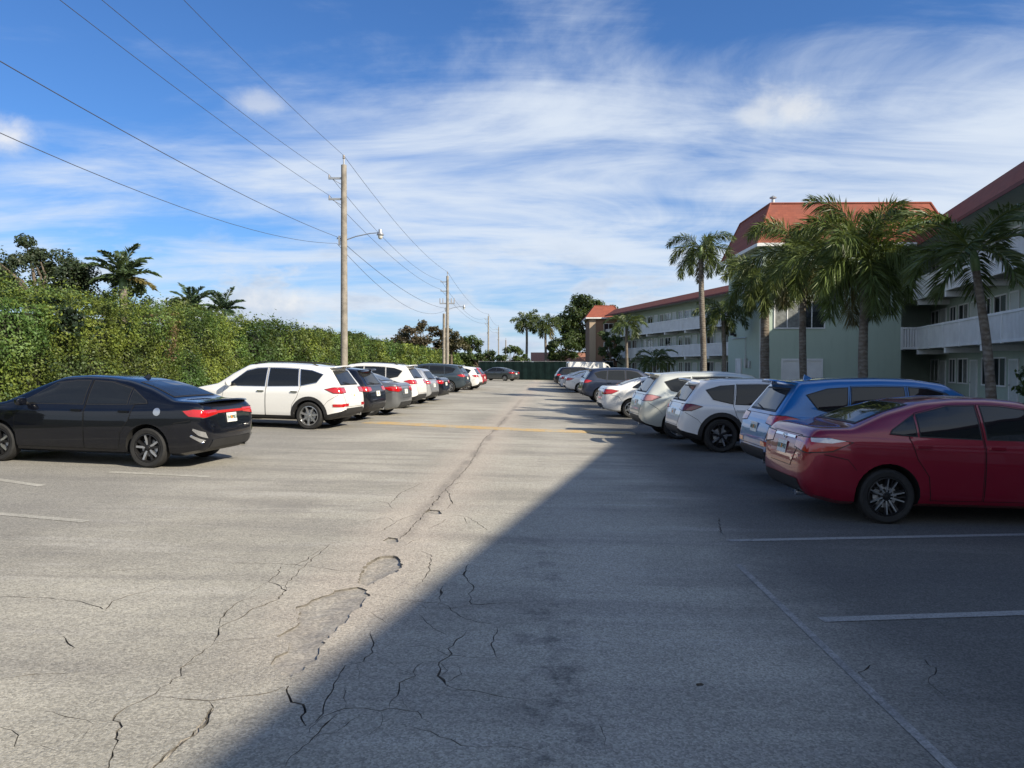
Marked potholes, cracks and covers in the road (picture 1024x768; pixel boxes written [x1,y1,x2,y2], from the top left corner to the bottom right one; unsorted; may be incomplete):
crack [6,590,151,609]
crack [359,483,484,571]
crack [286,551,536,764]
crack [48,544,338,768]
pothole [271,587,370,677]
pothole [357,556,403,586]
